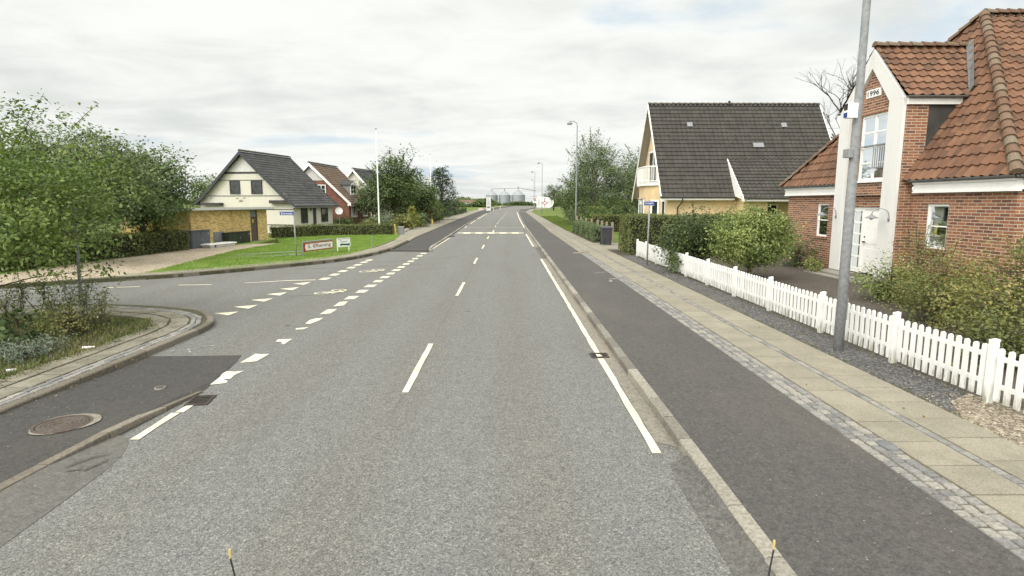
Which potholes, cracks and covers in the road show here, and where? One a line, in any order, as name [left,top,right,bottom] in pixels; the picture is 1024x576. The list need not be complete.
manhole cover [28,413,101,435]
drain grate [184,394,217,406]
